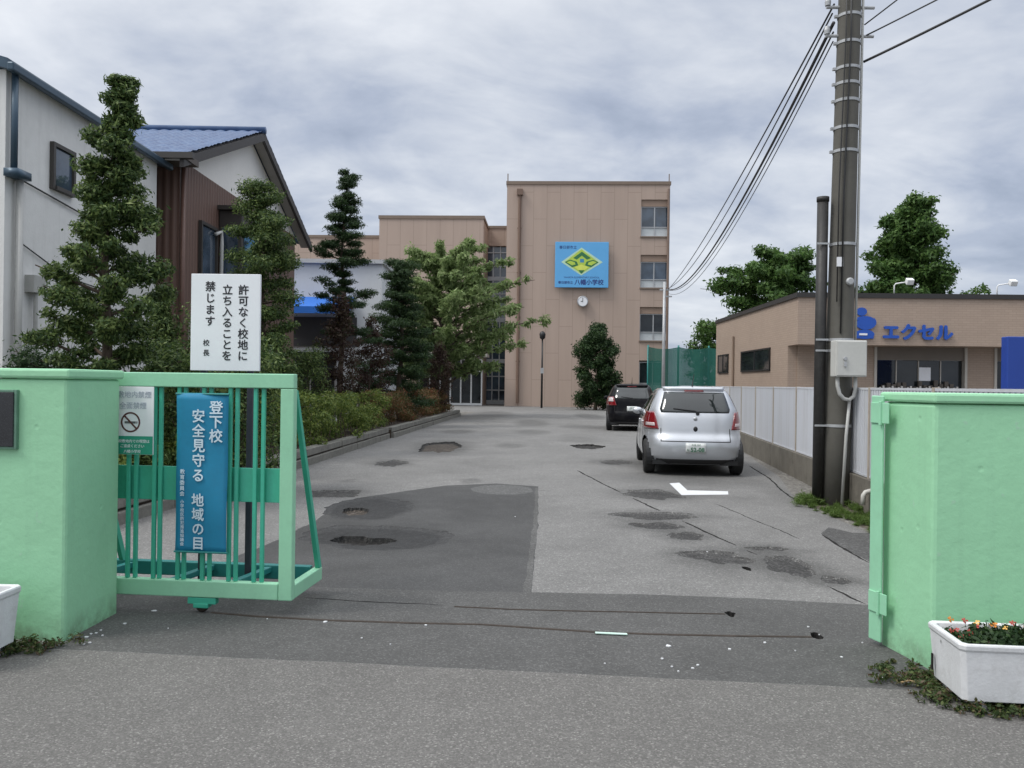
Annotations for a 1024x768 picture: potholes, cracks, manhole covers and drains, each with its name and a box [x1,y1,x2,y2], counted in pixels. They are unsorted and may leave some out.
crack [750,466,795,500]
pothole [418,442,462,453]
